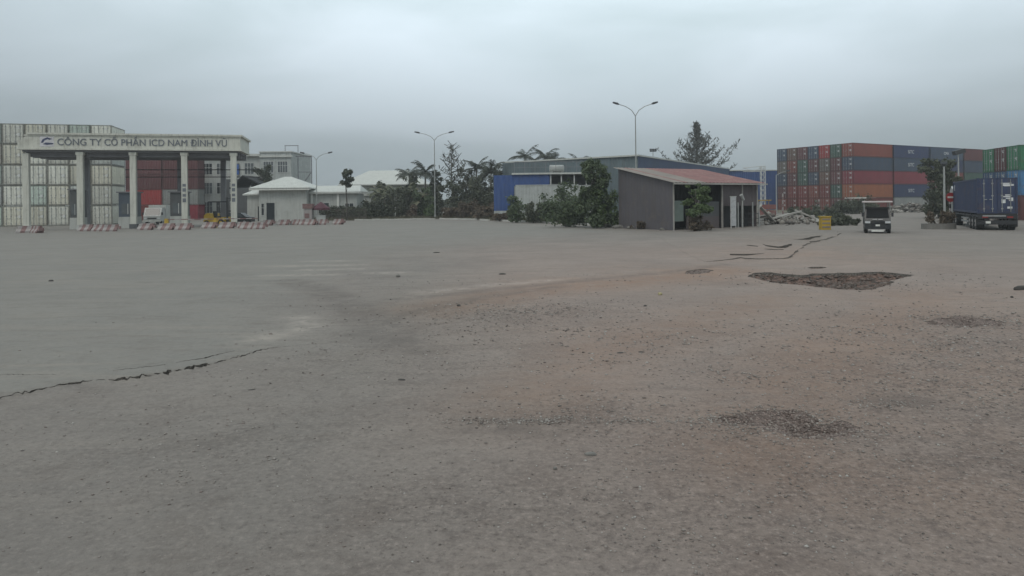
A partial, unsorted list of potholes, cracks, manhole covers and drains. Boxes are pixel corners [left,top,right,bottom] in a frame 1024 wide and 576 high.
pothole [927,316,1005,327]
pothole [714,410,860,439]
crack [0,345,293,398]
crack [730,236,820,256]
pothole [748,272,912,290]
